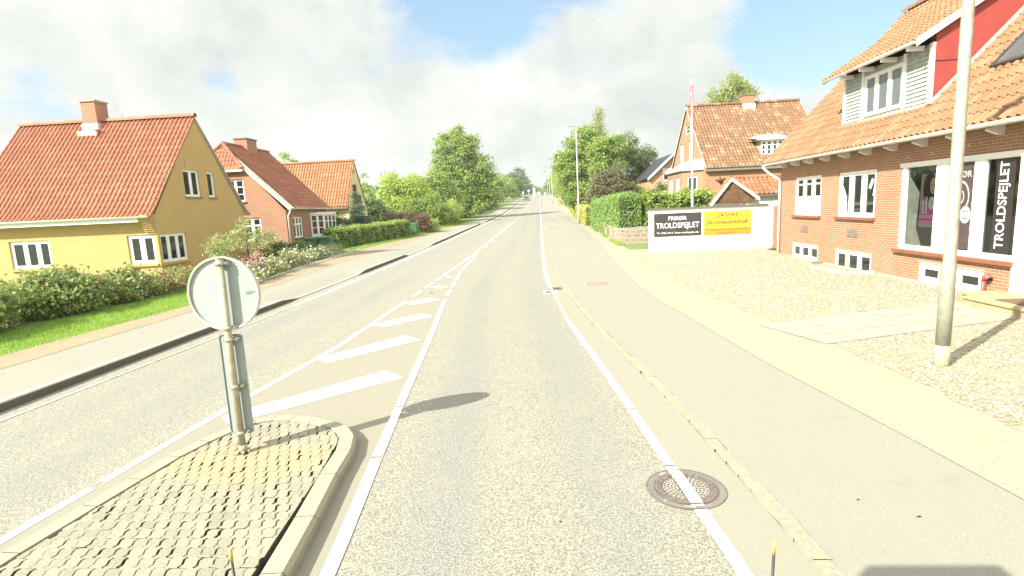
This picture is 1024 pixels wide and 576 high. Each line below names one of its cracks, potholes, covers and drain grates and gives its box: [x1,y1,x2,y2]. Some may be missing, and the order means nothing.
manhole cover [646,469,728,510]
